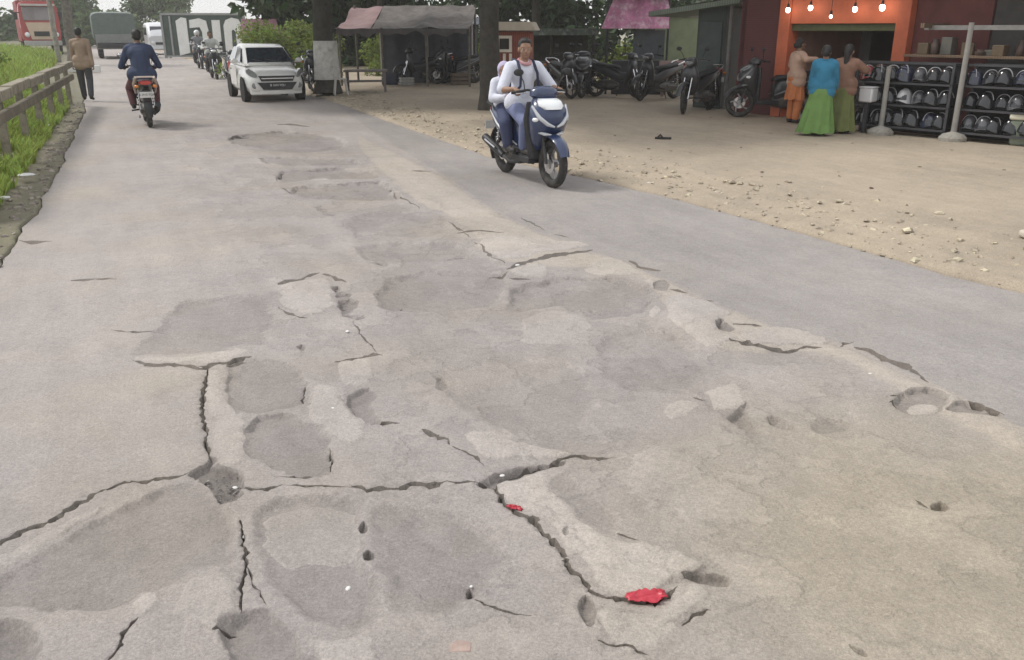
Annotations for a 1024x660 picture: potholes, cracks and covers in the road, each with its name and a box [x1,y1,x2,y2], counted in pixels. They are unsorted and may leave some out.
crack [351,480,448,493]
pothole [577,594,596,627]
crack [0,489,106,546]
pothole [330,286,367,320]
pothole [930,501,948,512]
crack [840,342,929,408]
crack [335,320,383,362]
crack [133,356,252,463]
pothole [946,400,1002,417]
crack [245,476,312,492]
pothole [715,318,734,332]
